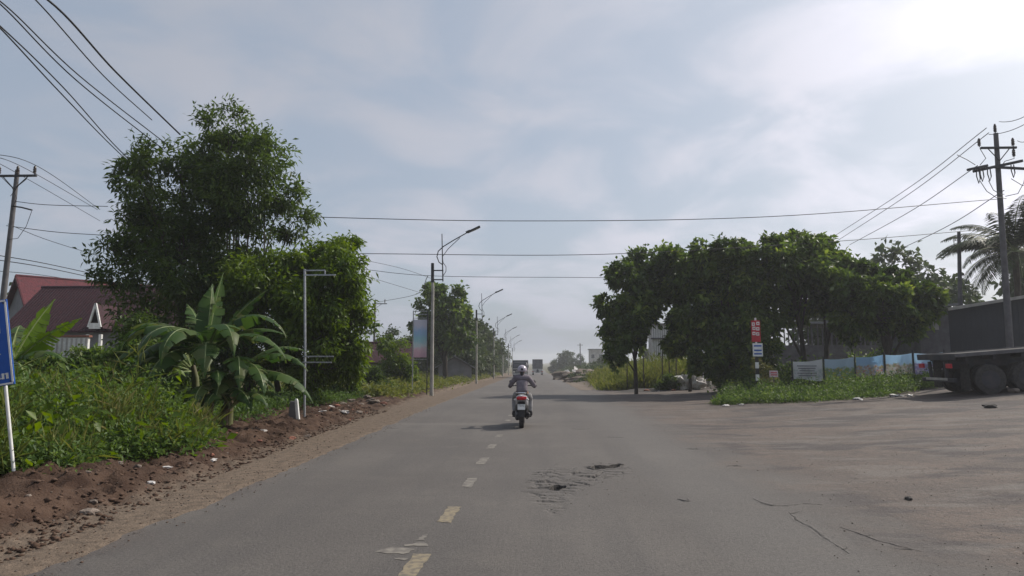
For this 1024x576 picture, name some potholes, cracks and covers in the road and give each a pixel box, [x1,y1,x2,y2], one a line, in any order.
crack [750,498,921,554]
